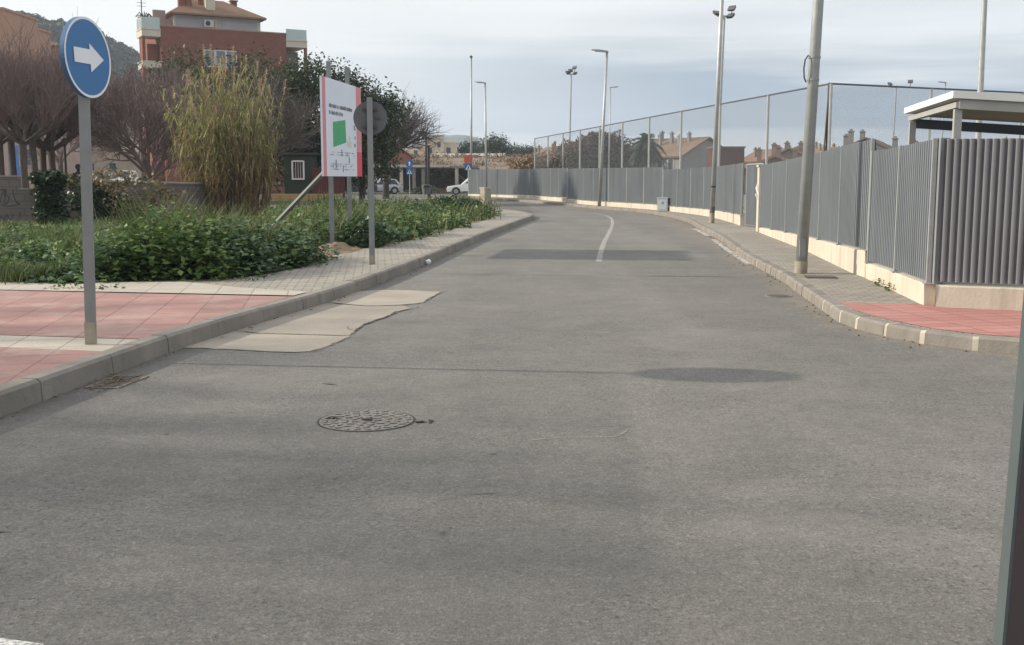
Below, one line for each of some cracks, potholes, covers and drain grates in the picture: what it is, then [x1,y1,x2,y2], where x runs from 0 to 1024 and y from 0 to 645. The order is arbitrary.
drain grate [84,374,149,389]
manhole cover [317,410,415,432]
